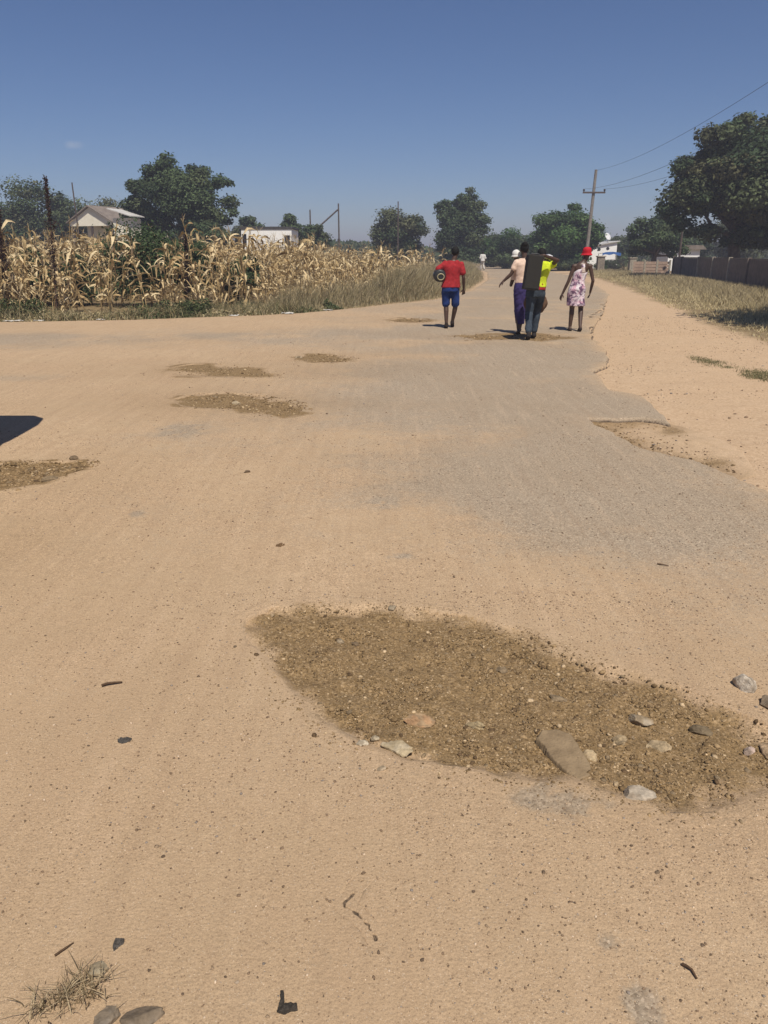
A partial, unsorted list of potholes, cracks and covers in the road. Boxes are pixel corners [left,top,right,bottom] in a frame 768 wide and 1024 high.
pothole [283,353,365,364]
pothole [0,459,106,493]
pothole [592,422,757,481]
crack [334,874,386,948]
pothole [228,597,768,830]
pothole [440,332,583,343]
pothole [152,362,298,380]
pothole [163,391,324,419]
